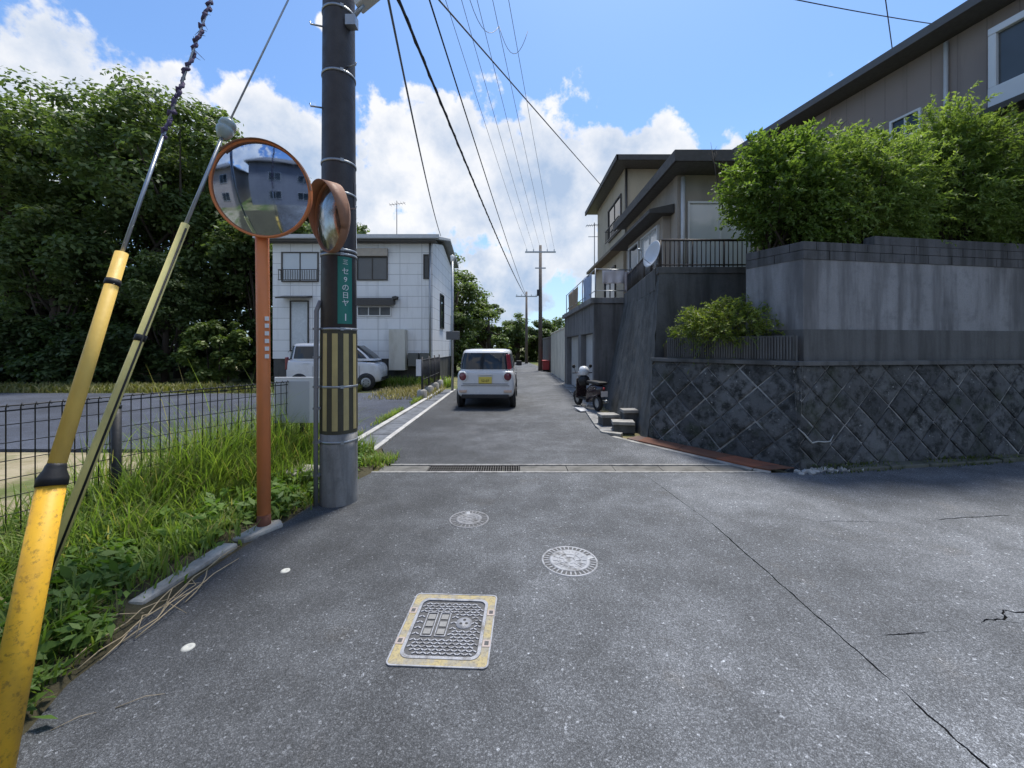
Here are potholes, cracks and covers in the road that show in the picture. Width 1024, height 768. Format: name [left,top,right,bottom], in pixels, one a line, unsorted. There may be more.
crack [652,480,989,768]
manhole cover [449,511,489,528]
crack [983,610,1024,623]
manhole cover [542,546,598,577]
manhole cover [386,593,497,670]
